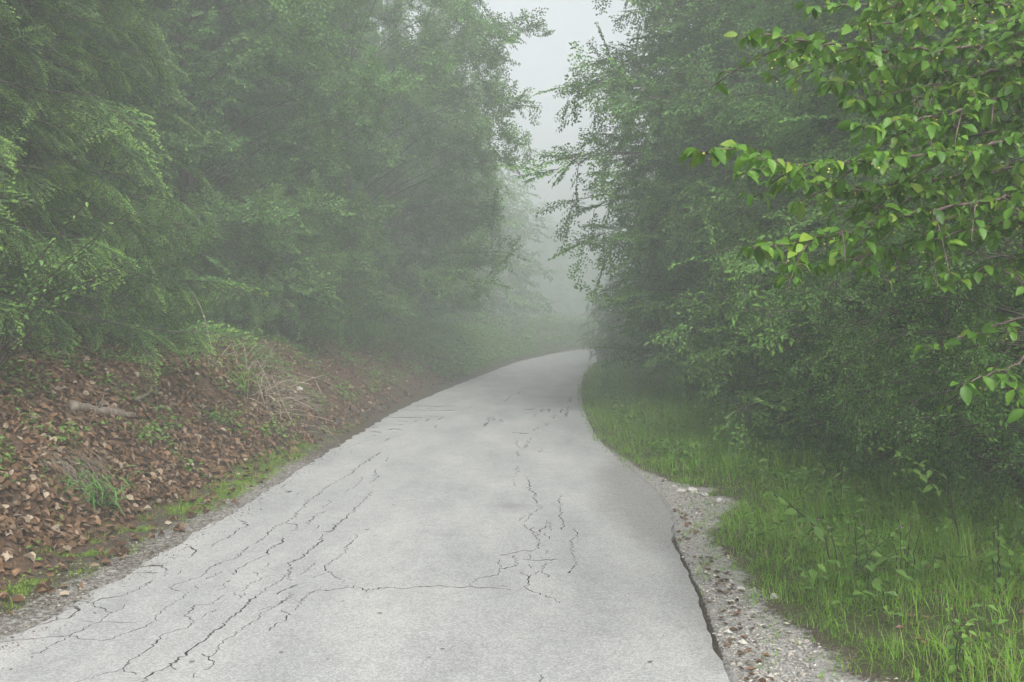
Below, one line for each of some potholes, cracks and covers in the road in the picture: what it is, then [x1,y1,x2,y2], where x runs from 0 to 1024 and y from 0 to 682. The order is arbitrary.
crack [325,393,578,603]
crack [5,406,450,682]
